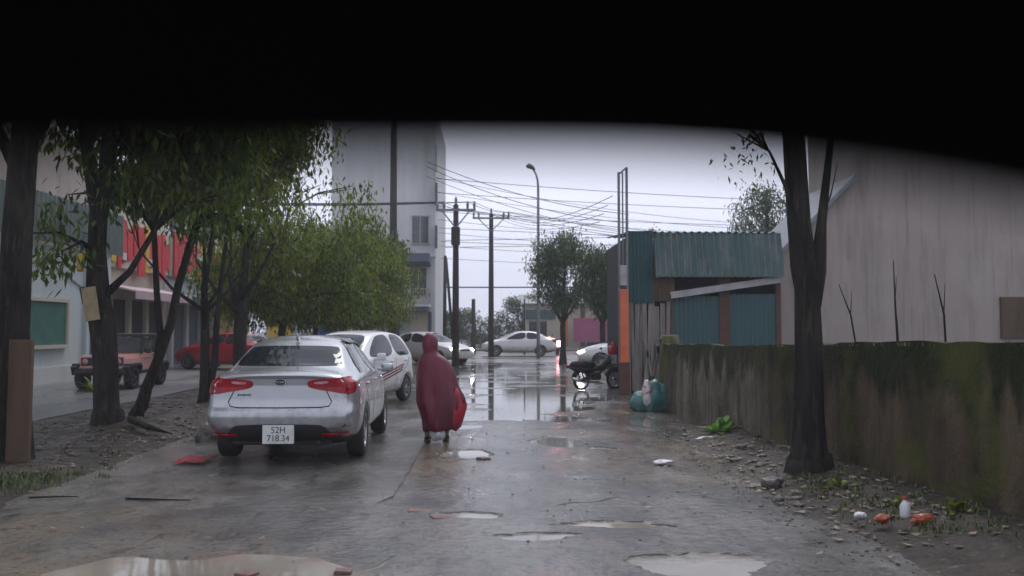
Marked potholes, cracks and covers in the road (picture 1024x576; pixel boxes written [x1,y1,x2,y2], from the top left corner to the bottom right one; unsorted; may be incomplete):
pothole [440,449,495,458]
pothole [549,520,680,528]
pothole [487,532,583,541]
pothole [623,551,774,576]
pothole [428,511,503,519]
crack [557,497,617,506]
pothole [525,435,589,448]
